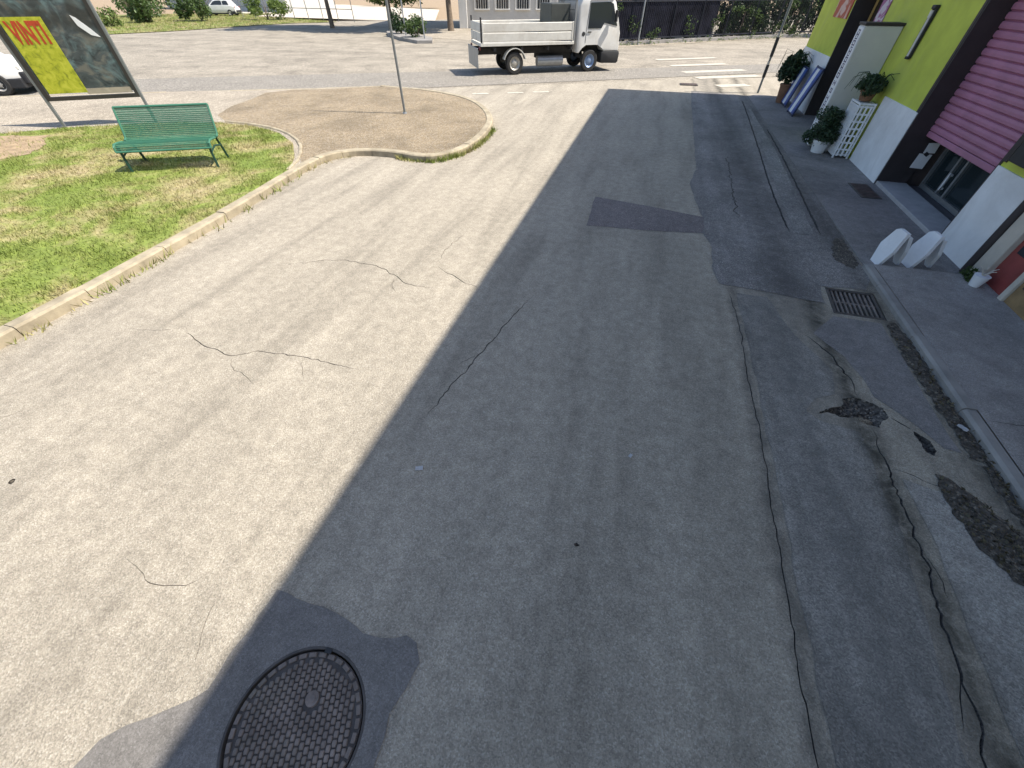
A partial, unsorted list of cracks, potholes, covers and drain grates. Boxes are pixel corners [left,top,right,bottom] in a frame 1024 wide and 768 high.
crack [428,297,532,413]
crack [295,260,426,289]
pothole [820,397,889,428]
drain grate [825,288,886,321]
crack [137,327,359,378]
pothole [914,432,937,456]
crack [873,418,987,768]
crack [127,559,216,586]
manhole cover [216,646,366,768]
crack [807,336,857,395]
crack [725,101,790,232]
